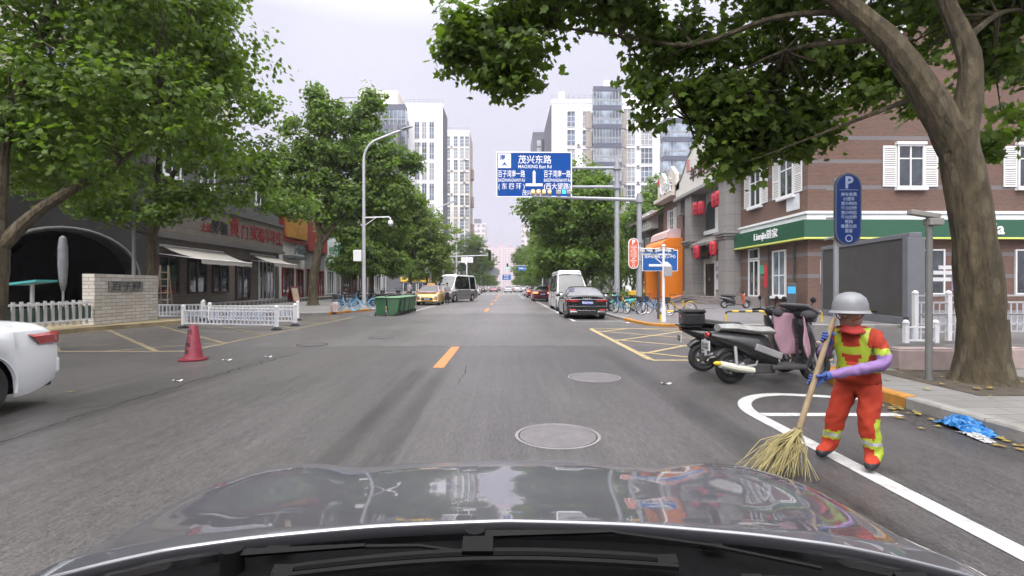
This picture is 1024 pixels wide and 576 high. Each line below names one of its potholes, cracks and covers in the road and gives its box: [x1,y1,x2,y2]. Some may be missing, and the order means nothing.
manhole cover [515,423,601,450]
manhole cover [568,372,621,382]
